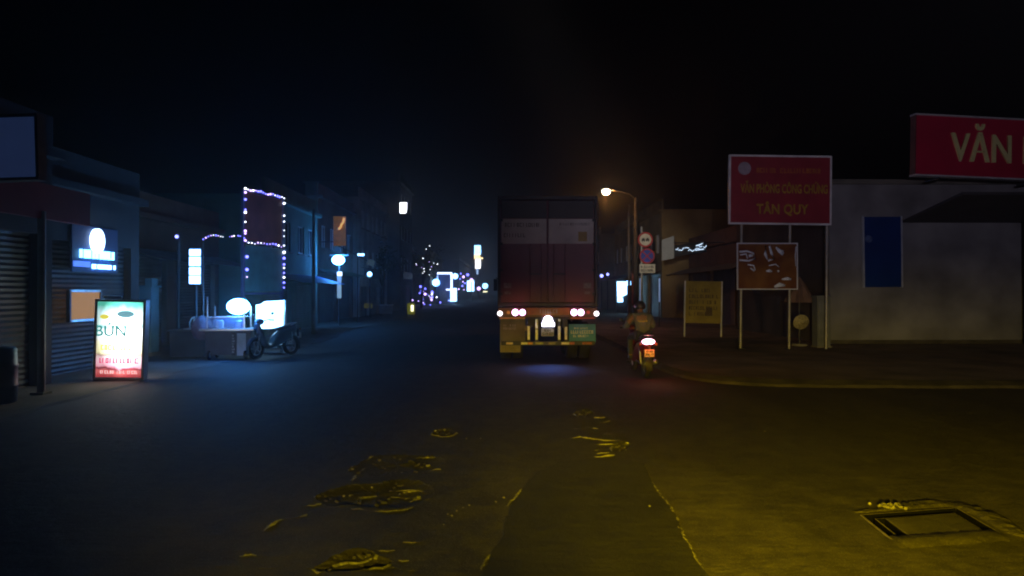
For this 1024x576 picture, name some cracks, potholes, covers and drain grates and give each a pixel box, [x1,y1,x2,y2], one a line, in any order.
pothole [609,441,631,453]
pothole [314,547,394,573]
manhole cover [853,500,1024,548]
pothole [573,409,594,417]
pothole [314,479,437,509]
pothole [348,454,447,477]
pothole [430,428,458,437]
